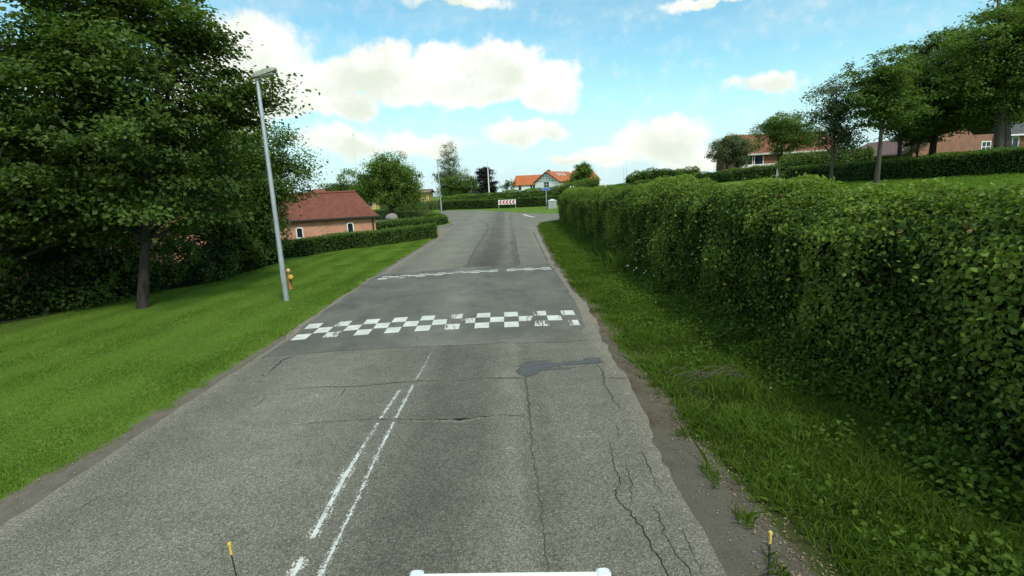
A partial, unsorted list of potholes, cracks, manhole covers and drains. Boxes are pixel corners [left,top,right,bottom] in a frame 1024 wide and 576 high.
crack [300,414,529,425]
crack [596,364,626,407]
crack [254,356,522,395]
crack [610,426,705,576]
